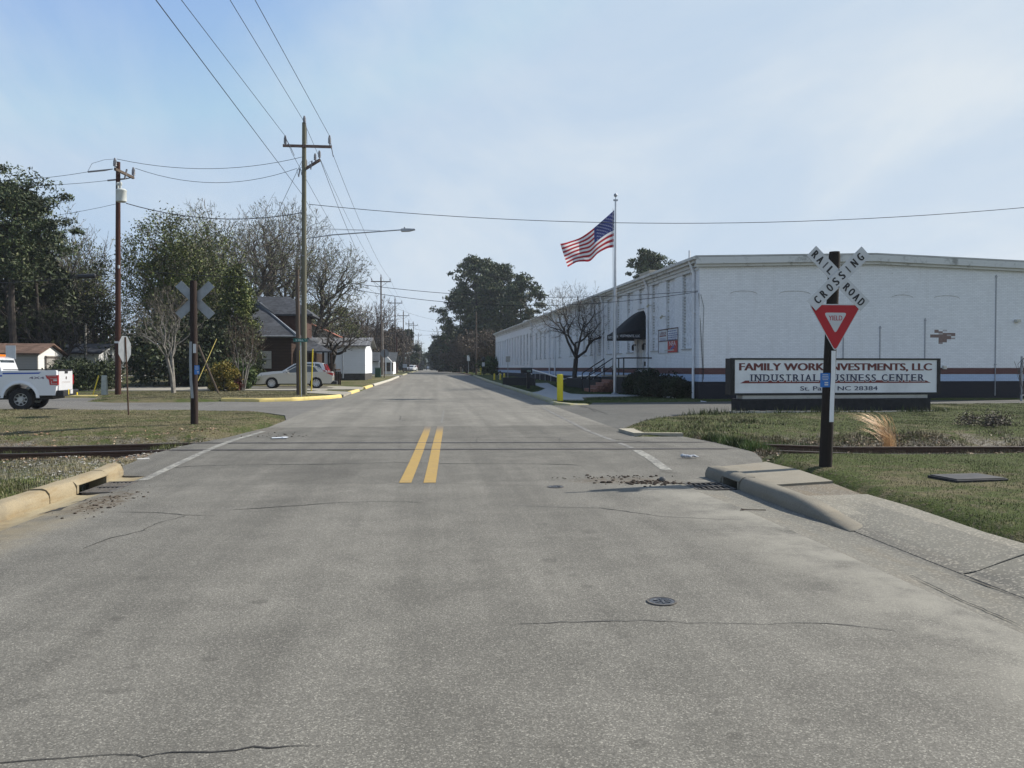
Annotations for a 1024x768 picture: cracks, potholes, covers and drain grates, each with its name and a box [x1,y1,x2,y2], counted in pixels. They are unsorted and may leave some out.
drain grate [63,470,137,495]
crack [0,745,319,763]
crack [83,512,186,549]
drain grate [684,471,754,491]
crack [516,620,900,632]
manhole cover [647,597,677,606]
utility cover [927,473,1009,483]
